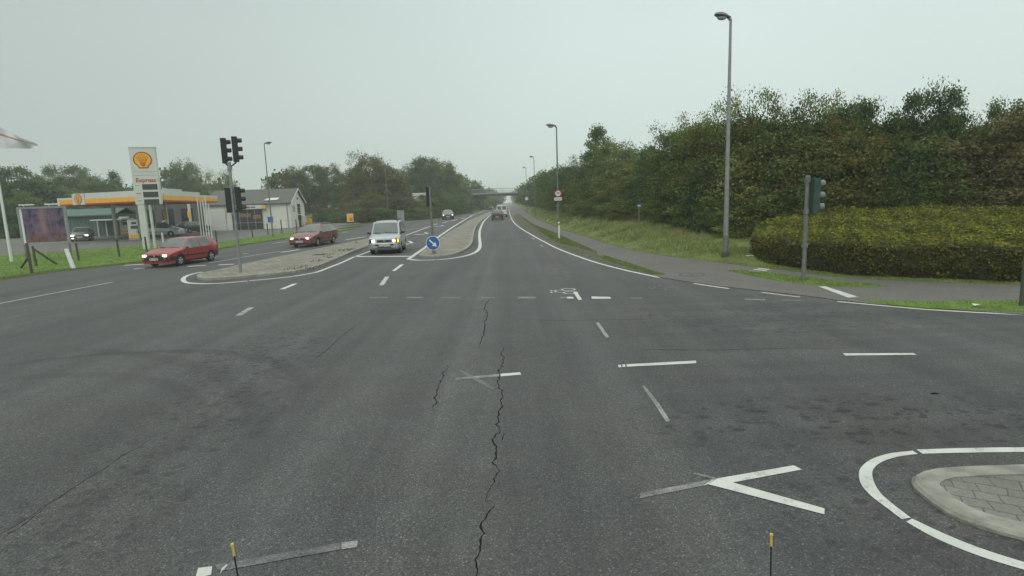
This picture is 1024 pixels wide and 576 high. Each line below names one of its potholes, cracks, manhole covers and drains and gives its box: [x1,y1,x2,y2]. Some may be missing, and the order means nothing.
crack [475,298,505,576]
